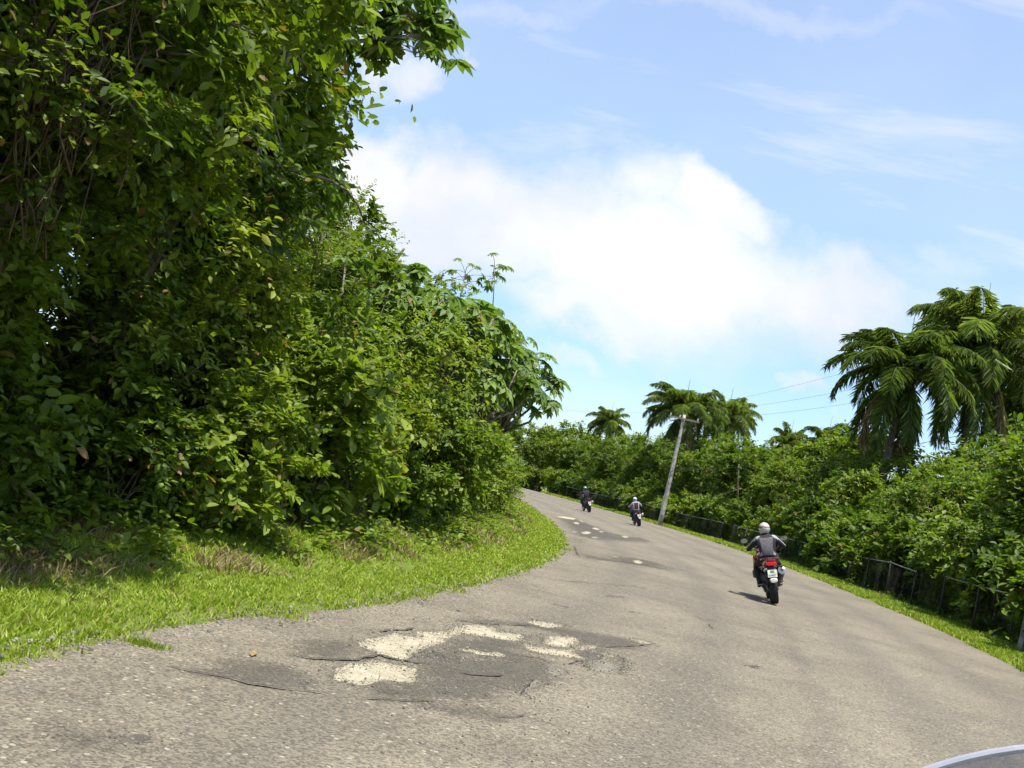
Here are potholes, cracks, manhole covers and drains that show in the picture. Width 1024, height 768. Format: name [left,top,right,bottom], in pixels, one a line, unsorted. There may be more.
pothole [333,660,419,686]
crack [171,665,329,694]
crack [293,652,427,663]
pothole [358,624,524,660]
pothole [542,635,580,648]
